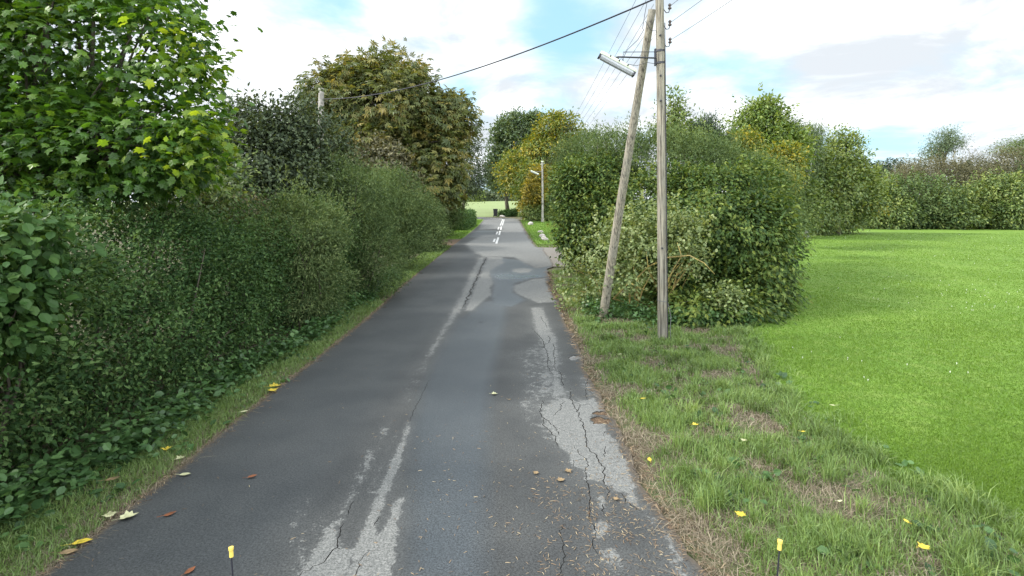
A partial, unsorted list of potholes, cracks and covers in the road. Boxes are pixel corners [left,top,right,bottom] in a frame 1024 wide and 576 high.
crack [300,501,369,576]
crack [532,321,643,556]
